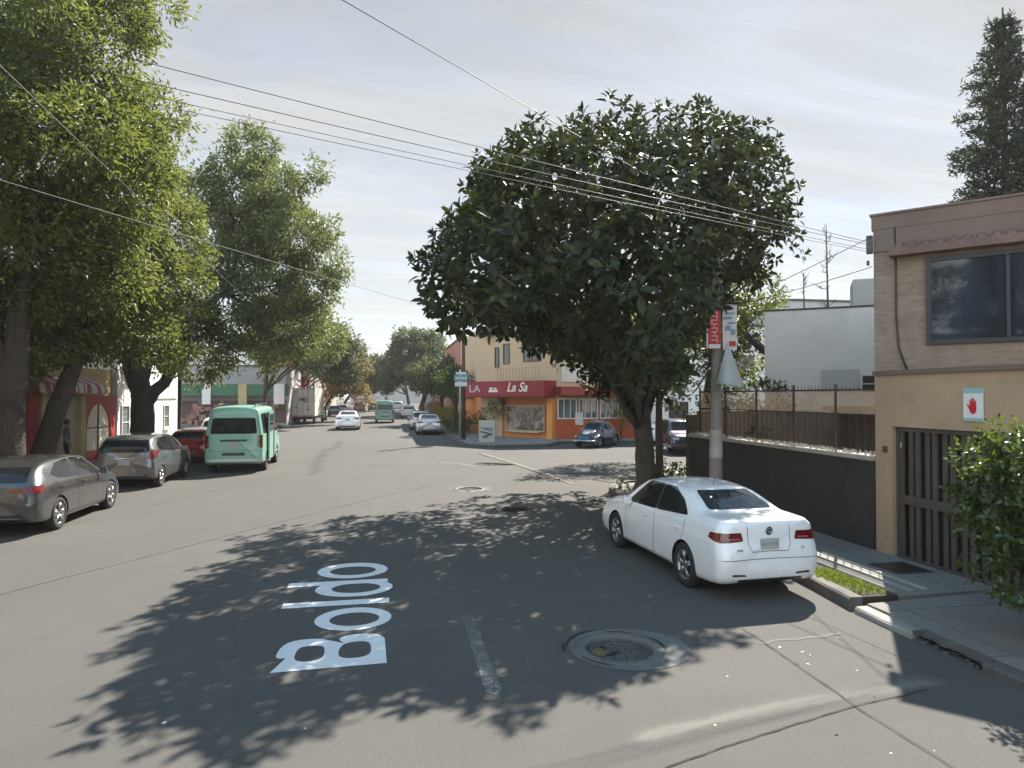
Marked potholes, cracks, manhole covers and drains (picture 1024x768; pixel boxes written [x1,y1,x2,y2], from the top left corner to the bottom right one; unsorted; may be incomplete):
crack [664,628,954,768]
manhole cover [561,629,691,671]
